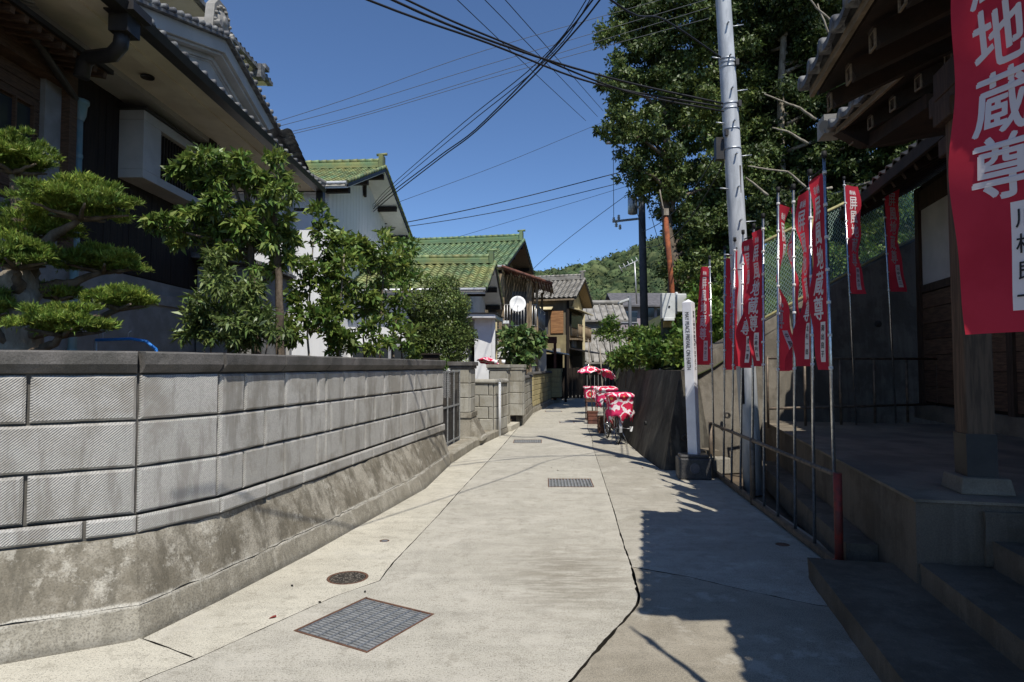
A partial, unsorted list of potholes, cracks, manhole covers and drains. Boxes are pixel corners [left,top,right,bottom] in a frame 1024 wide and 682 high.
manhole cover [327,571,368,585]
drain grate [548,478,594,487]
drain grate [294,597,434,653]
